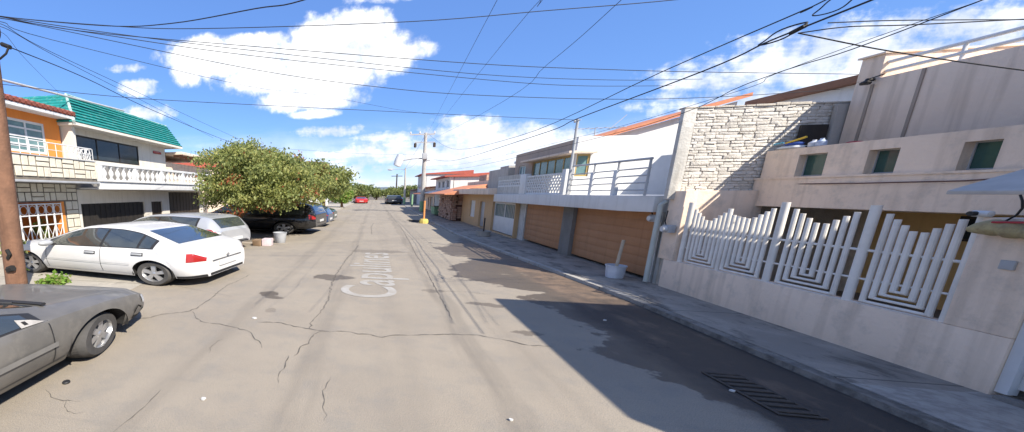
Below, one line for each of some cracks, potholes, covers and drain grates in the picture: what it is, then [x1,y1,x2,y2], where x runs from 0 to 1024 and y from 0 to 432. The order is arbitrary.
drain grate [701,371,829,420]
crack [138,275,262,353]
crack [273,251,542,382]
